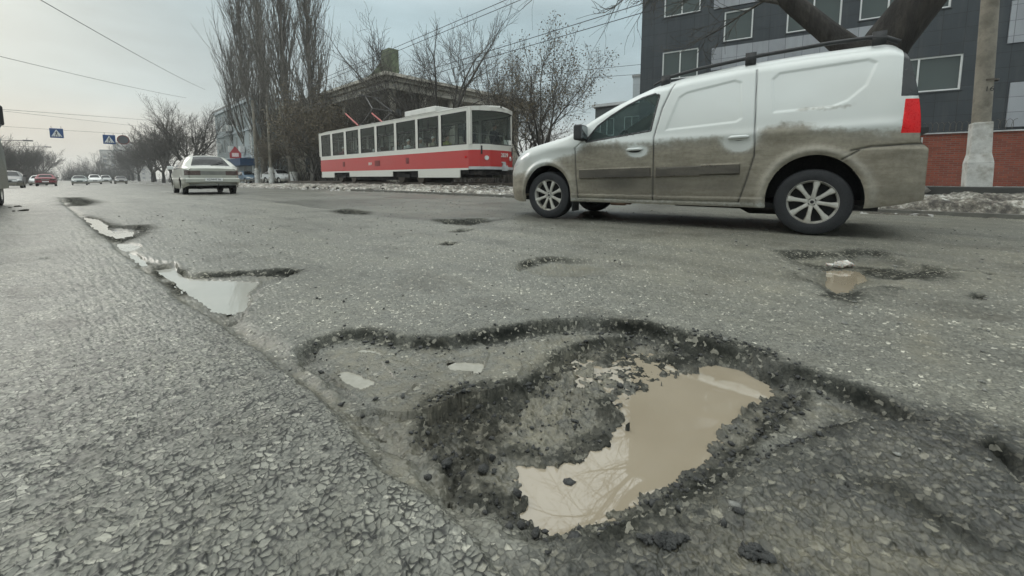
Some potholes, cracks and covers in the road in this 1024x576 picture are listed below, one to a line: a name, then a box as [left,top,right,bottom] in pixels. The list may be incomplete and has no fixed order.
pothole [289,317,921,570]
pothole [60,197,100,207]
pothole [140,262,302,328]
pothole [82,215,153,244]
pothole [512,256,631,278]
pothole [777,249,944,301]
pothole [432,217,505,226]
